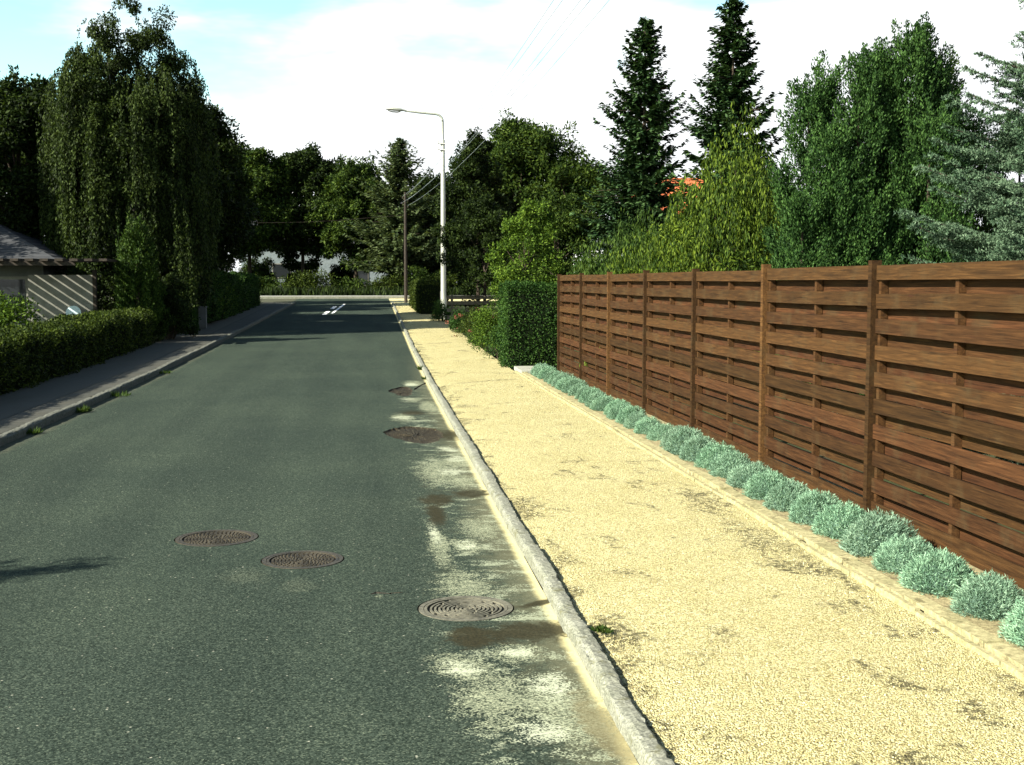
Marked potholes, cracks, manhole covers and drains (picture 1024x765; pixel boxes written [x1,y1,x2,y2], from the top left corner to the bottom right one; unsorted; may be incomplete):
manhole cover [419,596,513,621]
manhole cover [175,529,258,547]
manhole cover [262,550,343,569]
